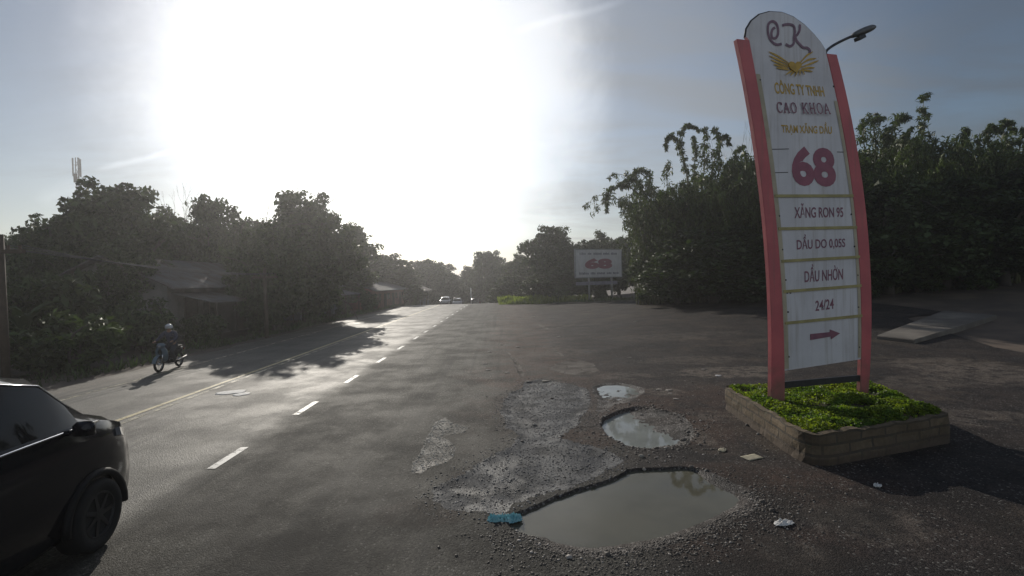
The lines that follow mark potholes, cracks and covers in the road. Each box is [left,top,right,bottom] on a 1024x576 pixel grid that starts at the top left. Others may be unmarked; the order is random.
pothole [592,383,645,413]
crack [506,351,525,377]
pothole [600,406,695,449]
pothole [507,466,760,558]
